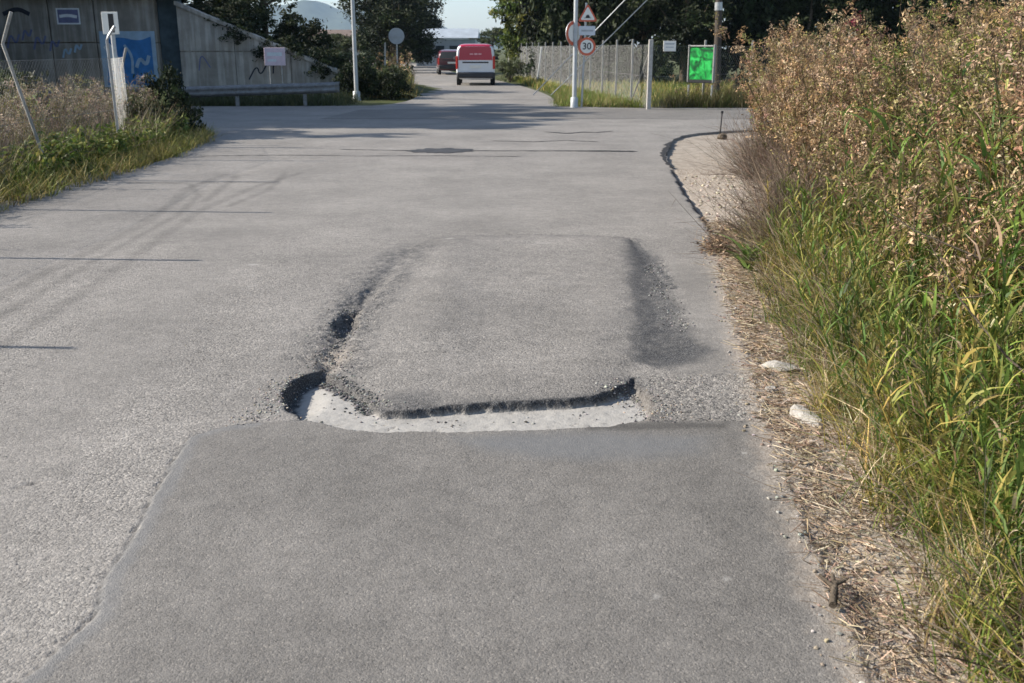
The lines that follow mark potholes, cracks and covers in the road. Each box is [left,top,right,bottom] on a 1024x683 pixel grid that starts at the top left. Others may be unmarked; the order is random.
pothole [316,269,394,376]
pothole [283,373,653,433]
